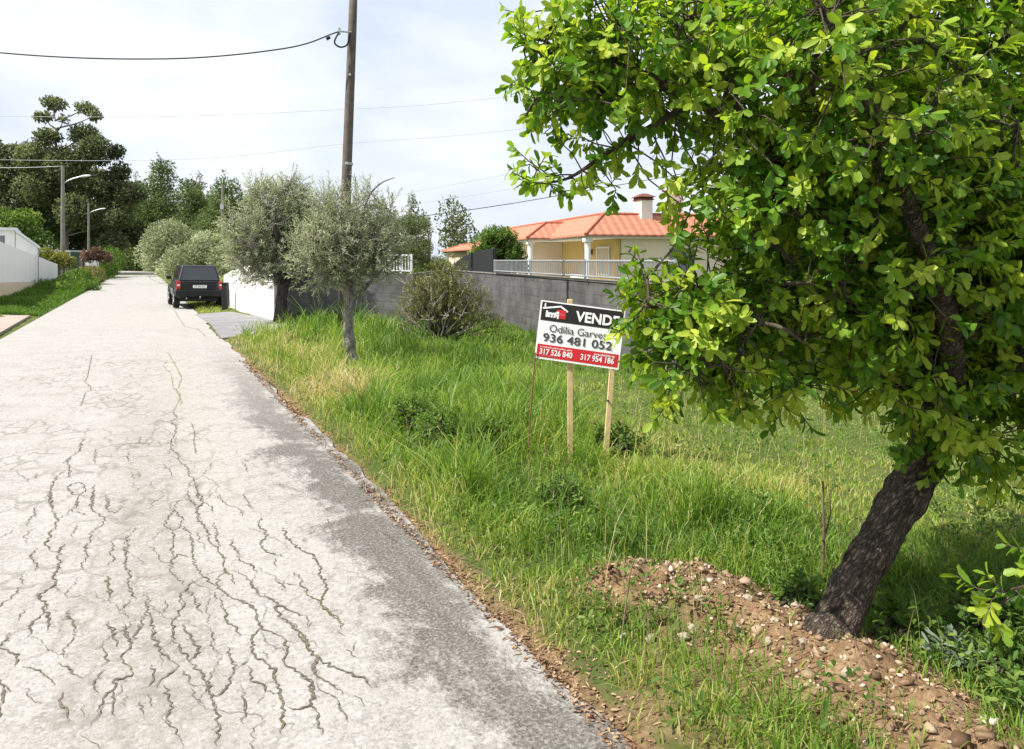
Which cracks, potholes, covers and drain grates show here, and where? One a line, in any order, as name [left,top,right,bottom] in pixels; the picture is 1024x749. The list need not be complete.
crack [163,354,184,411]
crack [37,413,371,749]
crack [0,438,120,721]
